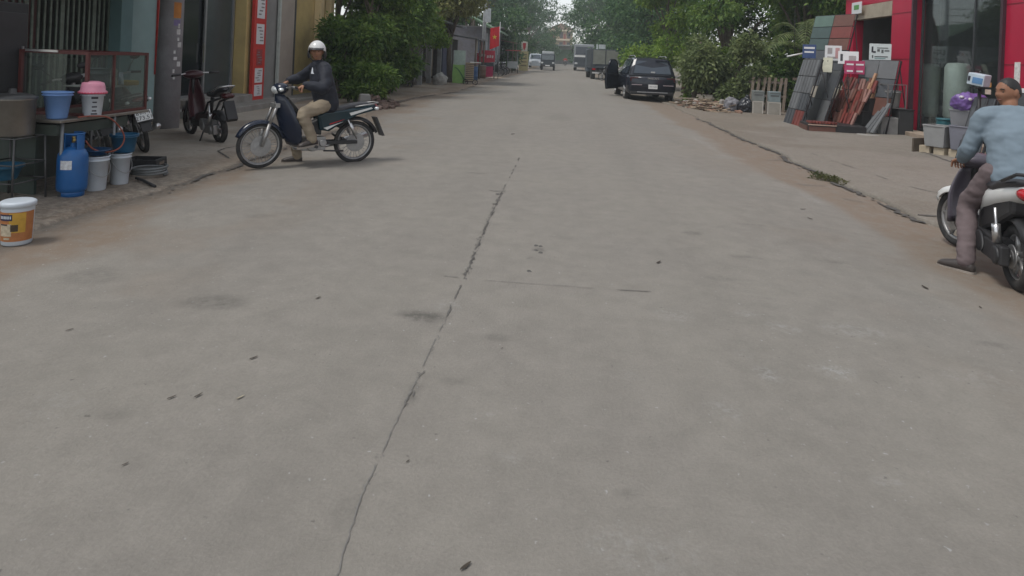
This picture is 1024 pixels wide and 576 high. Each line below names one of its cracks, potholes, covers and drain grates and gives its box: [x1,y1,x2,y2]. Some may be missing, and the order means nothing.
crack [695,118,937,223]
